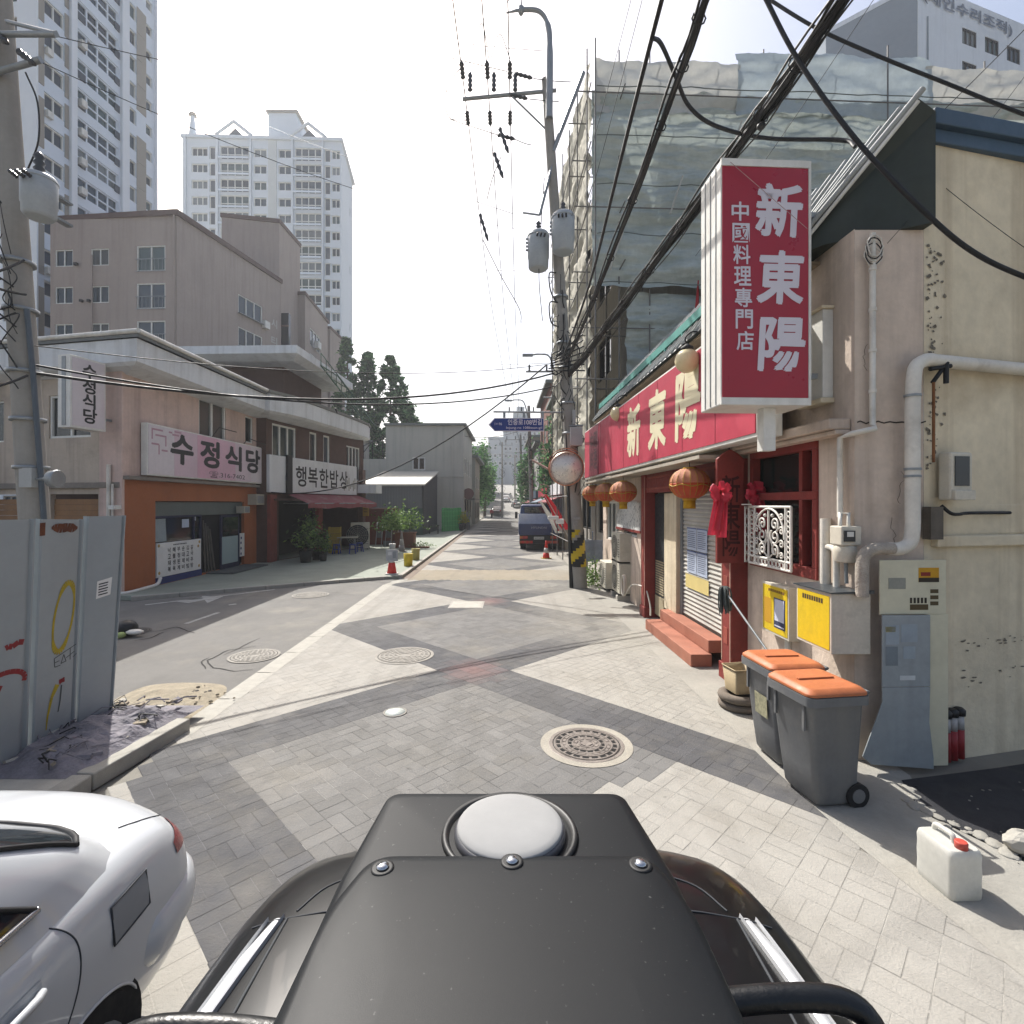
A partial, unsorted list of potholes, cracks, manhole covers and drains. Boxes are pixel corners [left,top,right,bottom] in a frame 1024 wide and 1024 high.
manhole cover [227,649,281,663]
crack [201,639,257,671]
manhole cover [540,724,633,768]
manhole cover [374,647,434,664]
